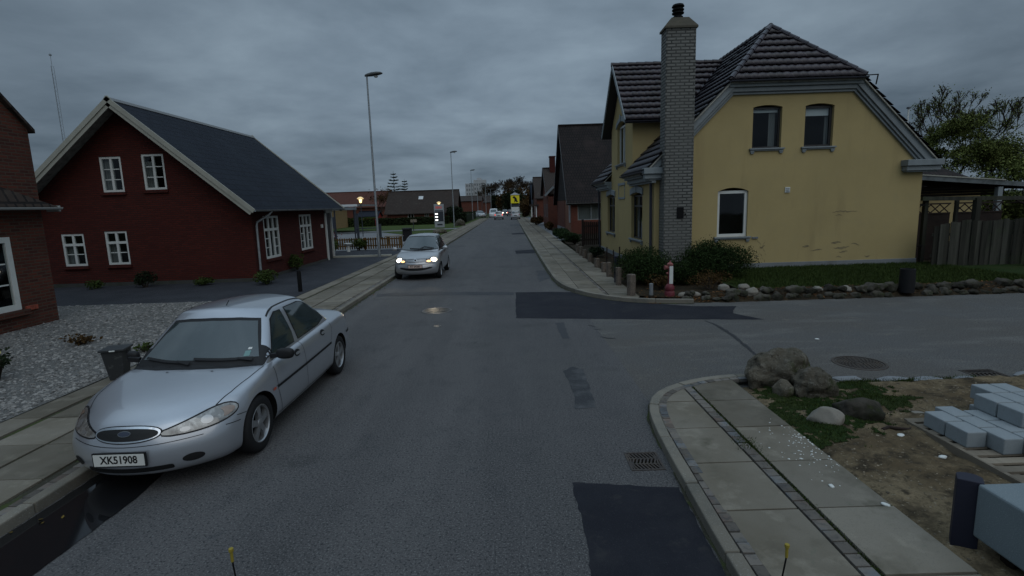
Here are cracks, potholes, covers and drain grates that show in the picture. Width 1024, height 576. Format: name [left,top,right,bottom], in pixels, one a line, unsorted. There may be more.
drain grate [624,451,666,471]
manhole cover [831,356,889,371]
drain grate [959,369,1012,377]
